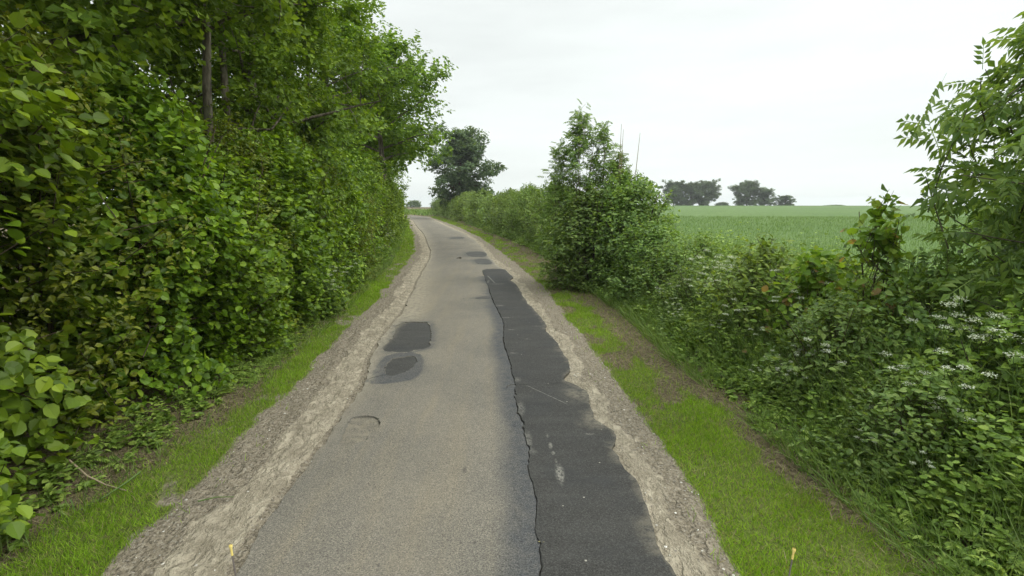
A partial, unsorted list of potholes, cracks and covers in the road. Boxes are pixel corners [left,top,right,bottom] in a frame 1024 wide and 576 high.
crack [489,290,543,576]
pothole [337,415,381,446]
